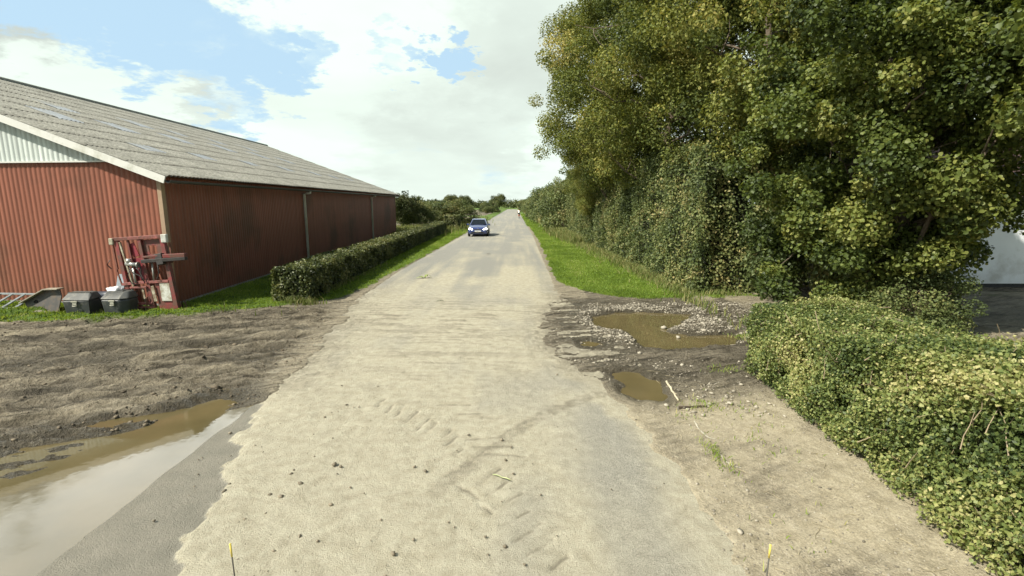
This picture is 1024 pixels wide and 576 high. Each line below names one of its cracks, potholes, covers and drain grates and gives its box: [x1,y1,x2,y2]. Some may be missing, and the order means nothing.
pothole [569,336,615,350]
pothole [578,307,750,351]
pothole [600,365,681,406]
